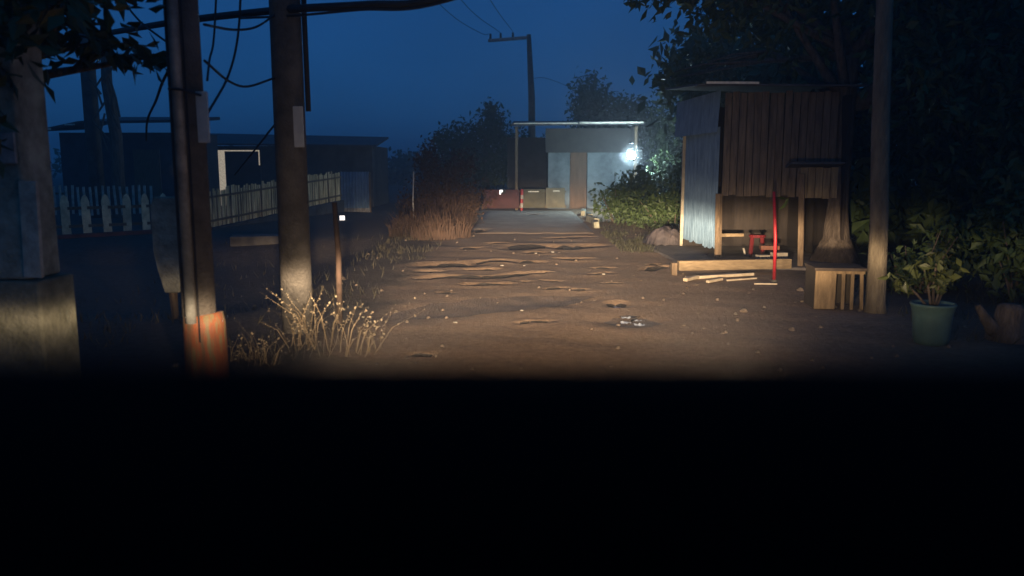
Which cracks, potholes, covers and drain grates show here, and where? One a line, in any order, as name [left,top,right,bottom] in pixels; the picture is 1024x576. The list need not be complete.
pothole [605,315,661,328]
